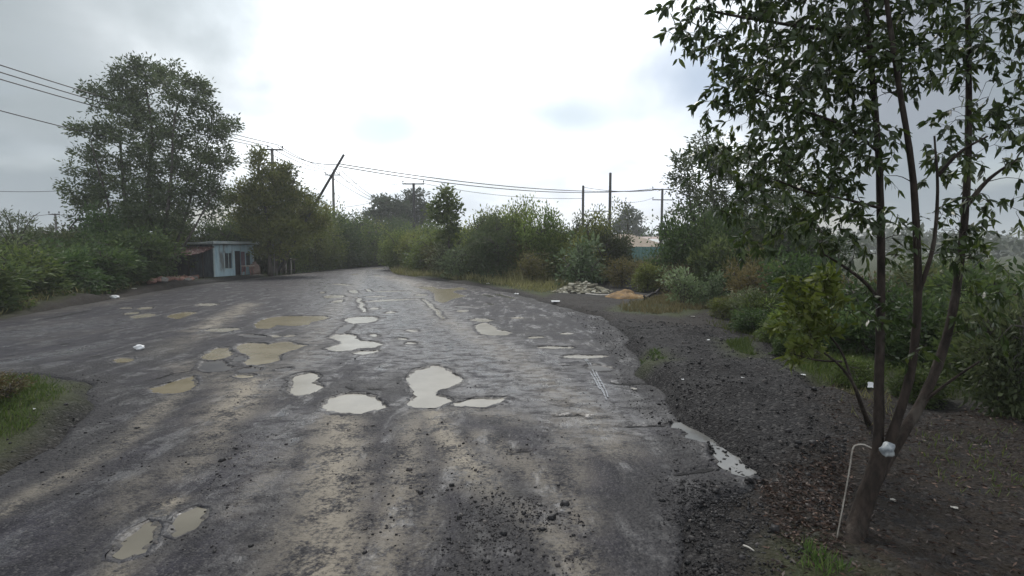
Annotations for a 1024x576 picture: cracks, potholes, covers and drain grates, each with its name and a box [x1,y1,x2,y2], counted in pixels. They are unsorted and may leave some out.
crack [352,290,449,320]
pothole [321,333,387,352]
pothole [701,443,763,482]
pothole [400,363,469,410]
pothole [251,315,333,329]
pothole [665,419,718,447]
pothole [448,395,511,409]
pothole [230,340,313,366]
pothole [141,374,204,395]
pothole [158,502,217,541]
pothole [471,322,515,336]
pothole [195,346,238,362]
